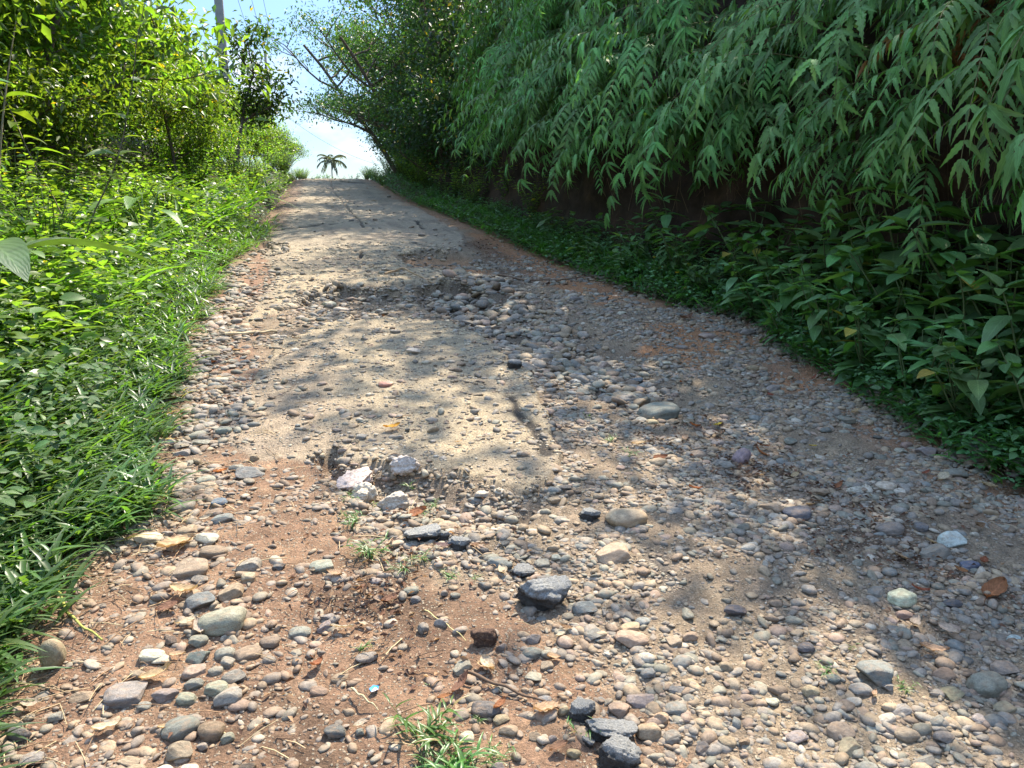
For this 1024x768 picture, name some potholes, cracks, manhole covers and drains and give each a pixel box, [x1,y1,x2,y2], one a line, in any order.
pothole [398,249,479,268]
pothole [411,280,511,327]
pothole [310,448,561,536]
crack [276,181,364,259]
